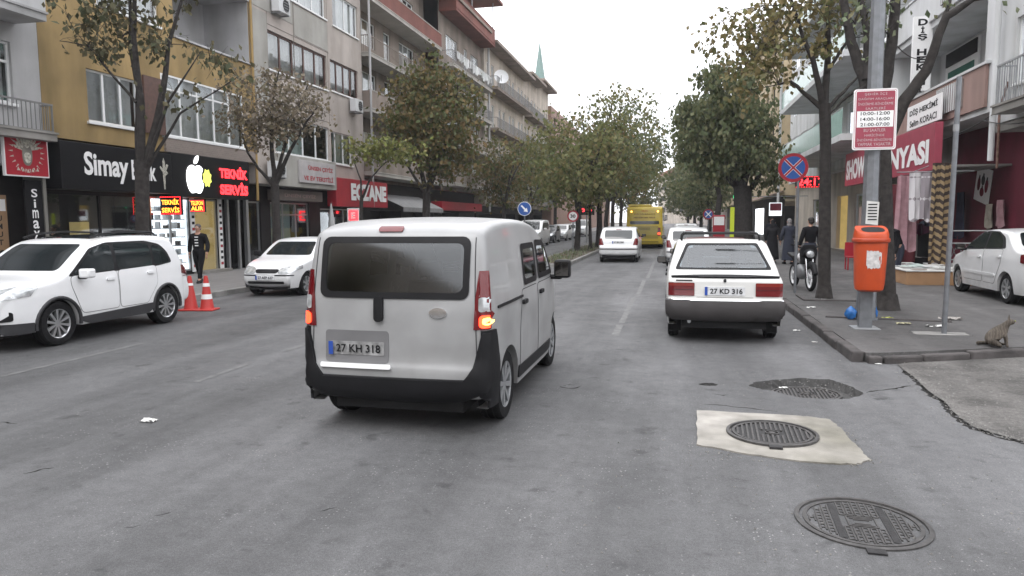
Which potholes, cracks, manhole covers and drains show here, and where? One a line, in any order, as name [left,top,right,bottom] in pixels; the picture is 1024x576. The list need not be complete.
pothole [748,378,863,399]
manhole cover [794,497,935,556]
manhole cover [772,386,843,399]
crack [866,371,1024,444]
manhole cover [726,420,820,450]
